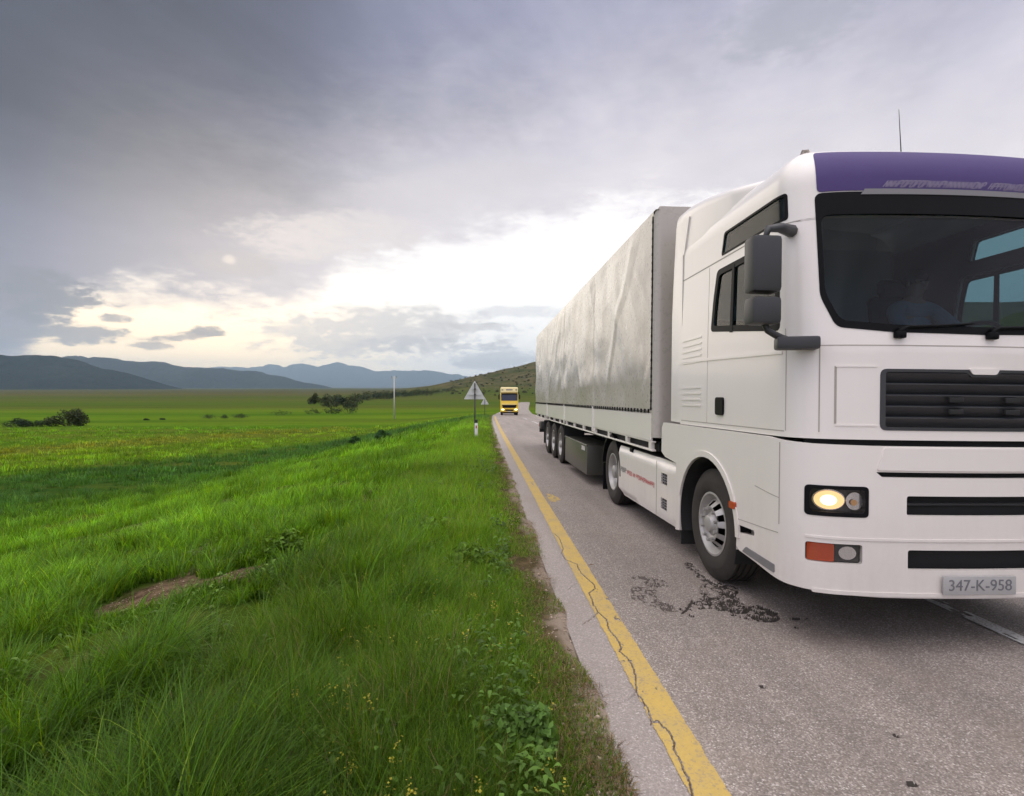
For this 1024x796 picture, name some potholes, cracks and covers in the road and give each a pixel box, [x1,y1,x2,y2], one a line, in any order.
crack [561,544,693,796]
